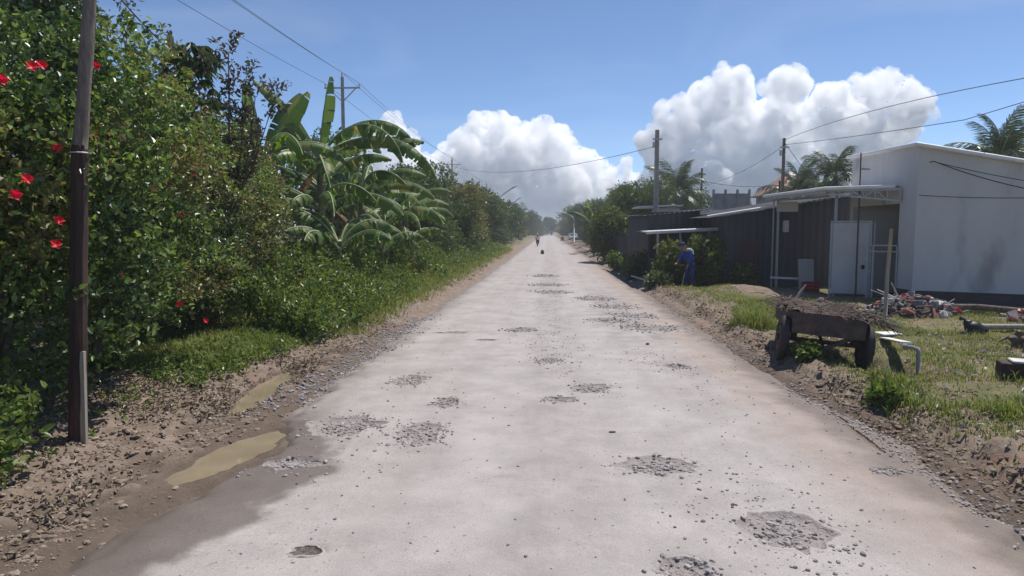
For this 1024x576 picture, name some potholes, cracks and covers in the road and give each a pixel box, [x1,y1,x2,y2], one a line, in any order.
pothole [587,450,732,485]
pothole [286,545,326,558]
pothole [564,380,621,397]
pothole [529,354,573,365]
pothole [498,327,541,335]
pothole [289,400,412,442]
pothole [373,420,454,466]
pothole [606,322,704,334]
pothole [695,501,869,574]
pothole [382,372,432,390]
pothole [537,395,586,404]
pothole [641,549,731,576]
